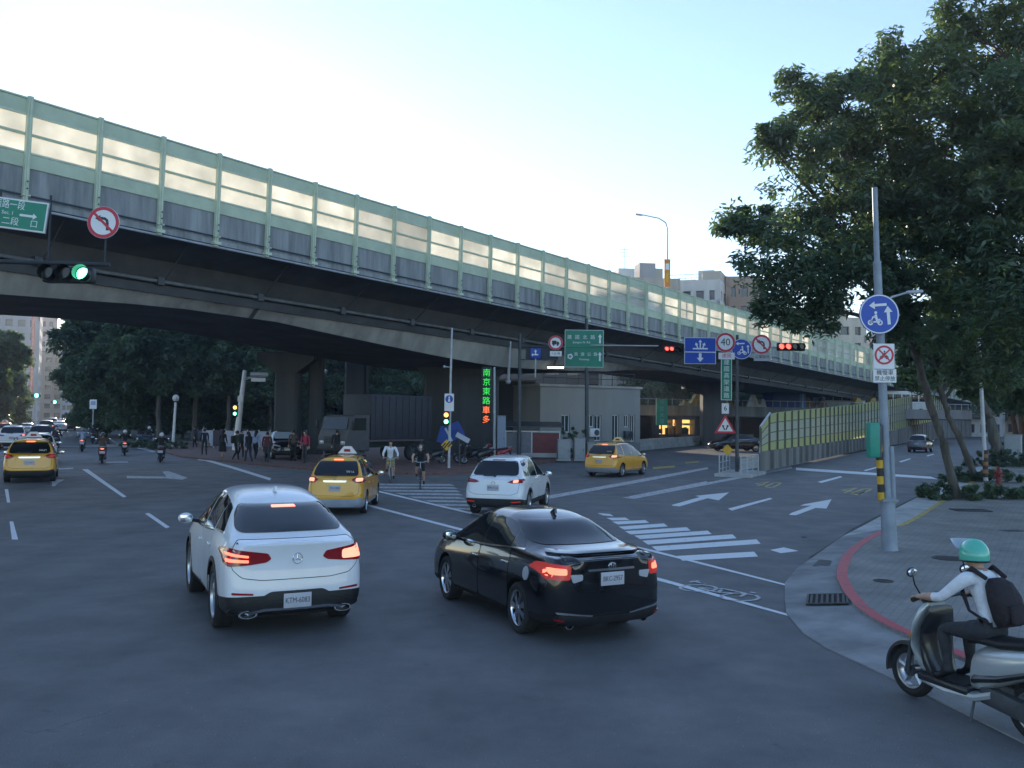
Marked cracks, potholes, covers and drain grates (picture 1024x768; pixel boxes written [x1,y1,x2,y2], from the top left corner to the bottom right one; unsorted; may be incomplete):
drain grate [806,593,849,605]
